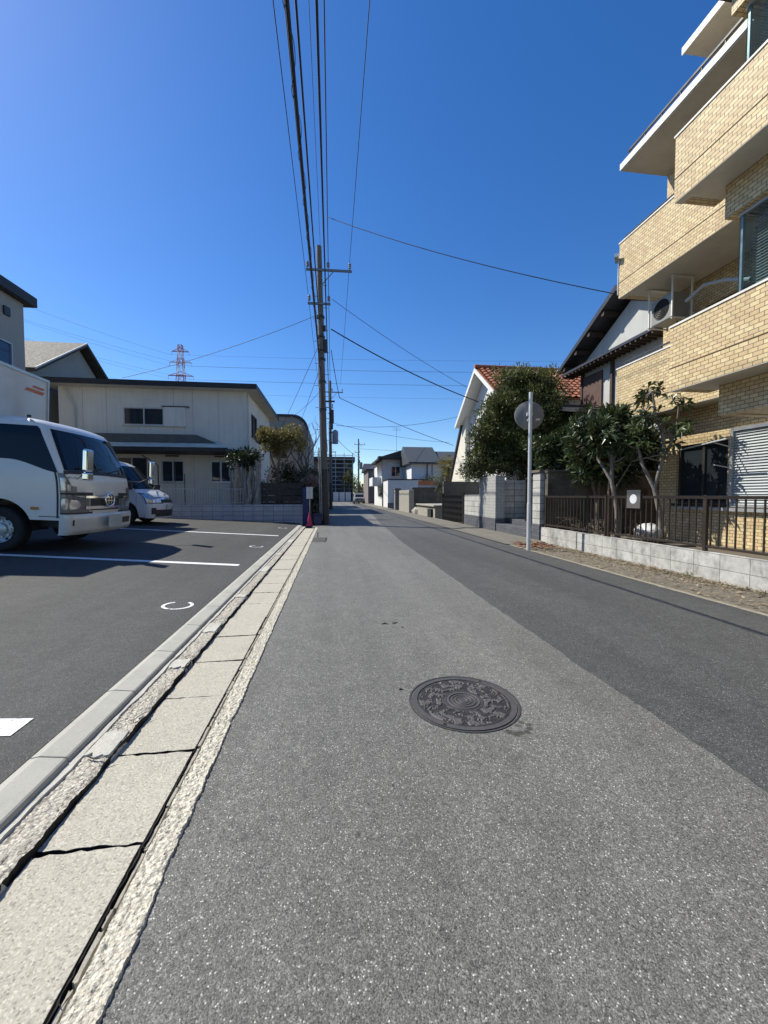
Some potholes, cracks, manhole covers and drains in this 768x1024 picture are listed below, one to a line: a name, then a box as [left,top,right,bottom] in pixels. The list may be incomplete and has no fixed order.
manhole cover [409,676,521,733]
crack [46,533,312,1024]
